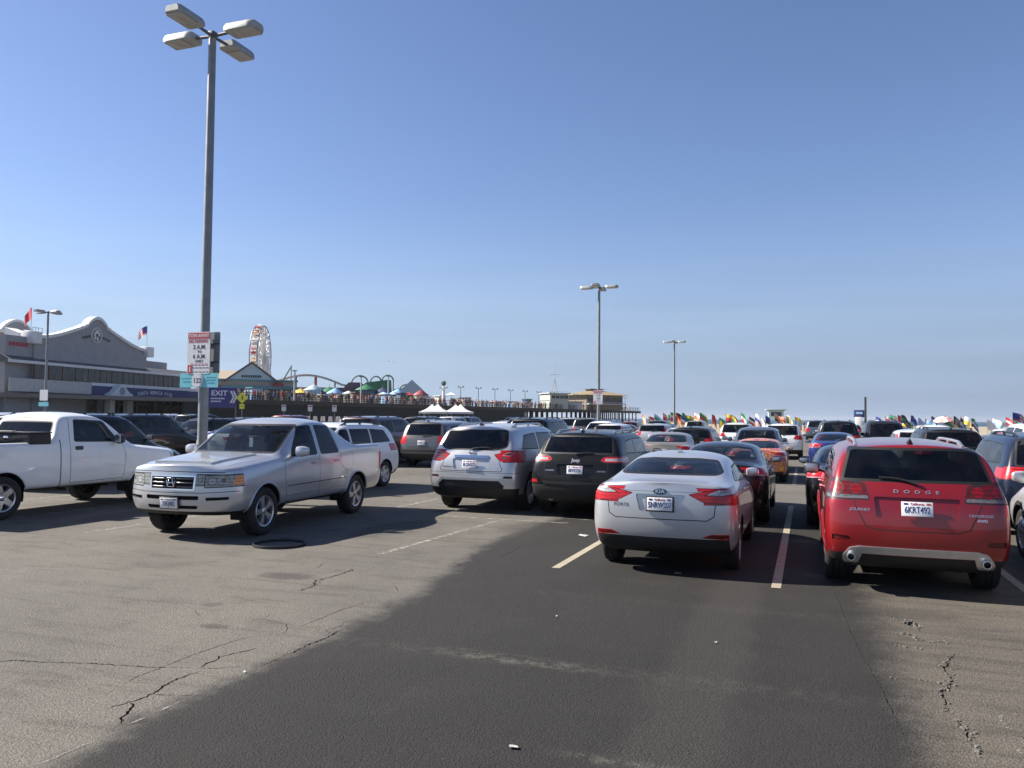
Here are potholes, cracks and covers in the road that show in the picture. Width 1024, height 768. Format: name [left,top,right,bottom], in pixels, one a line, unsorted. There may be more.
crack [301,564,356,591]
crack [890,618,981,758]
crack [0,635,258,724]
crack [252,602,367,664]
